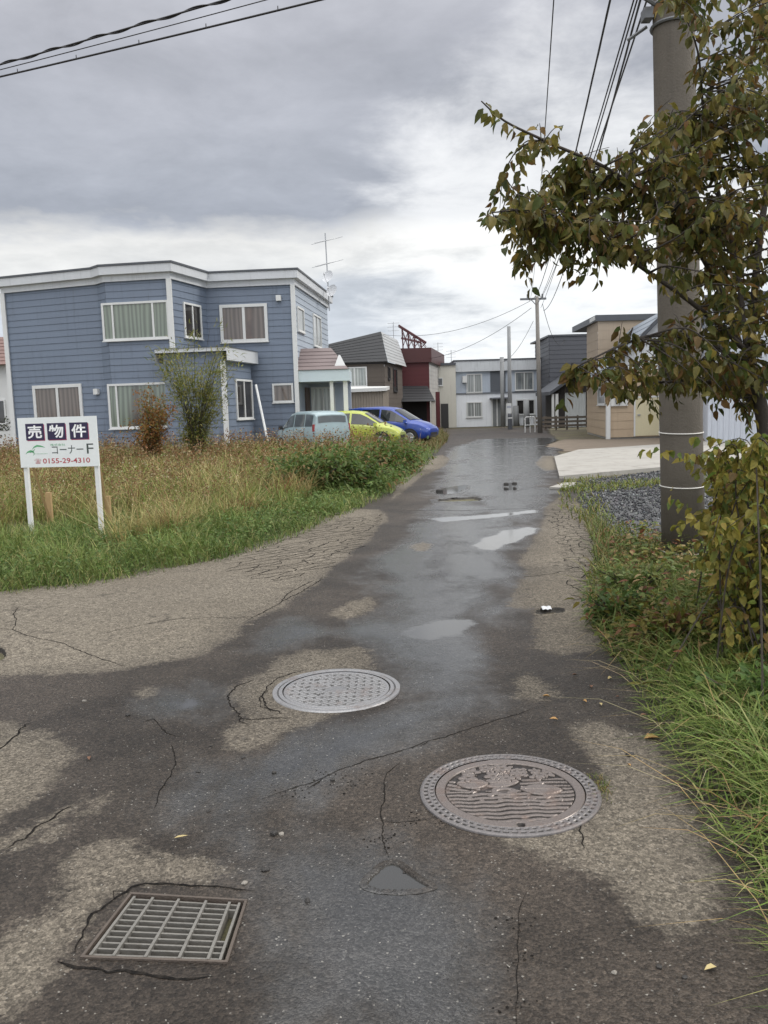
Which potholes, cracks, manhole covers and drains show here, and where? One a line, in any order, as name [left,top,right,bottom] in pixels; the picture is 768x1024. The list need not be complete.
crack [9,805,73,847]
crack [227,669,307,724]
crack [147,719,177,806]
manhole cover [420,754,602,838]
crack [227,514,383,618]
crack [492,890,538,1024]
drain grate [80,892,247,964]
pothole [359,859,438,895]
manhole cover [272,669,400,713]
crack [262,707,535,856]
crack [11,604,125,667]
